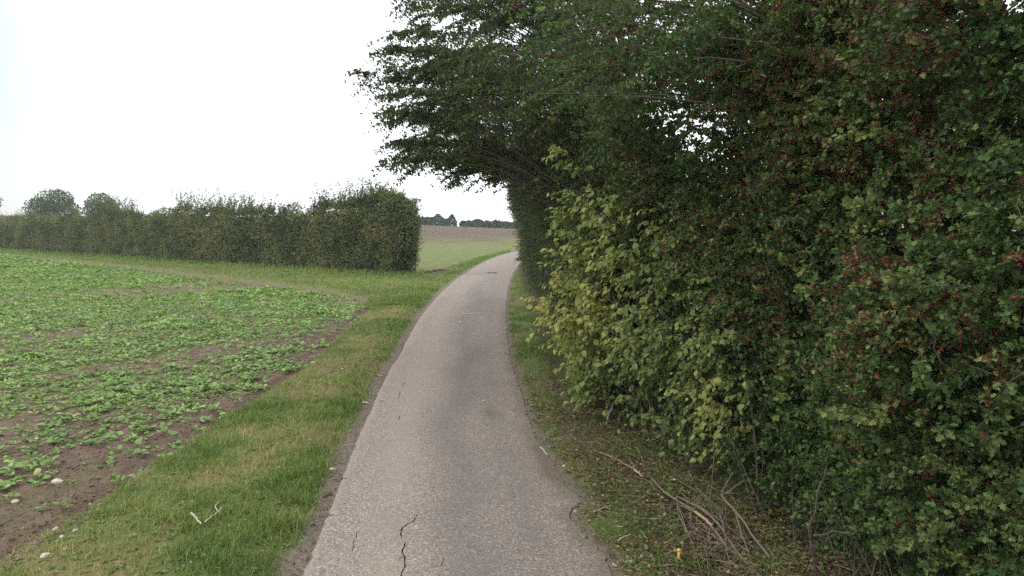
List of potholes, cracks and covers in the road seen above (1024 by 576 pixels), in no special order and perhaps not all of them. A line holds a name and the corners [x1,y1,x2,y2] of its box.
crack [399,514,424,576]
